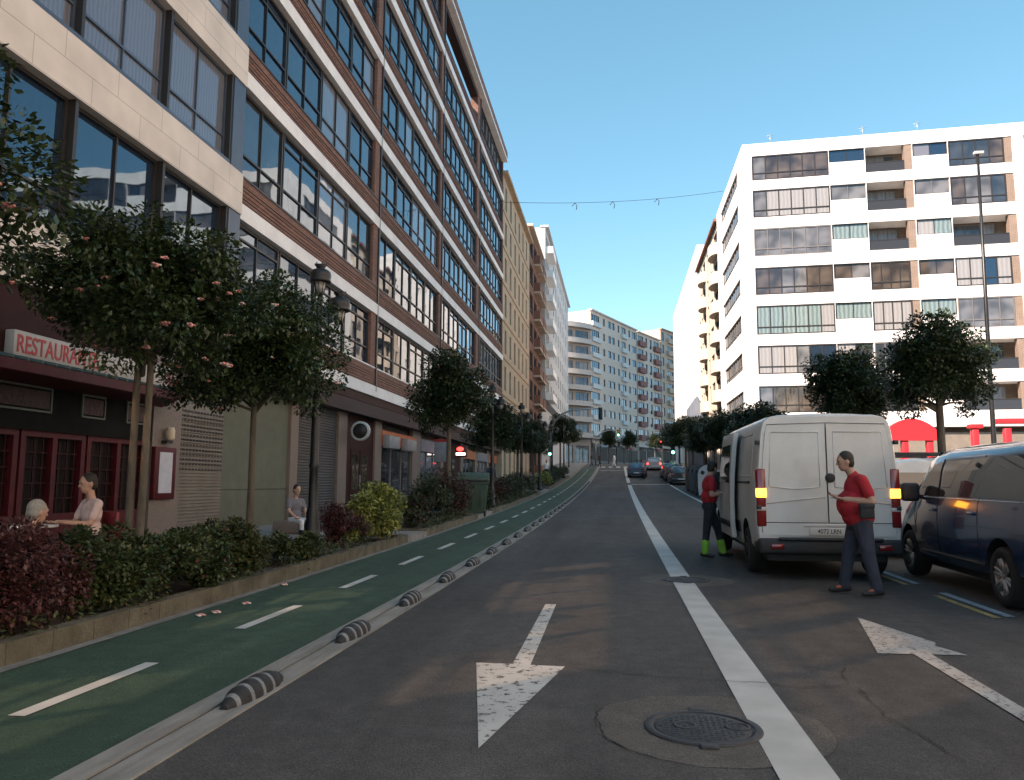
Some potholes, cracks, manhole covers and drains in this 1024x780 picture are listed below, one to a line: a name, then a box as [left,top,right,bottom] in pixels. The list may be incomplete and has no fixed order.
manhole cover [644,707,764,750]
